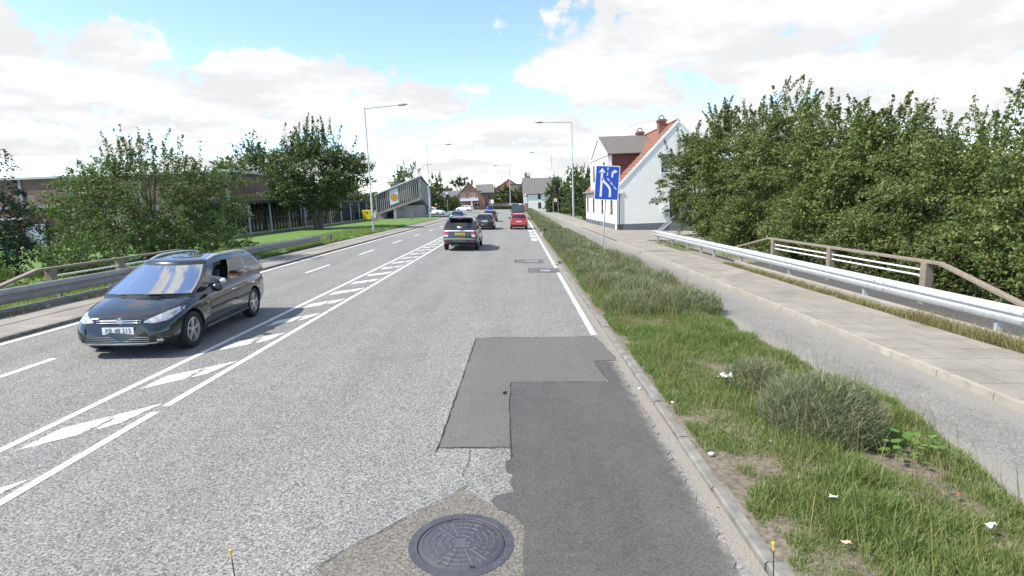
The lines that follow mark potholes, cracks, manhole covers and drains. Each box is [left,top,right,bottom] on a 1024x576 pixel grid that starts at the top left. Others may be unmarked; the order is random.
manhole cover [408,514,514,576]
